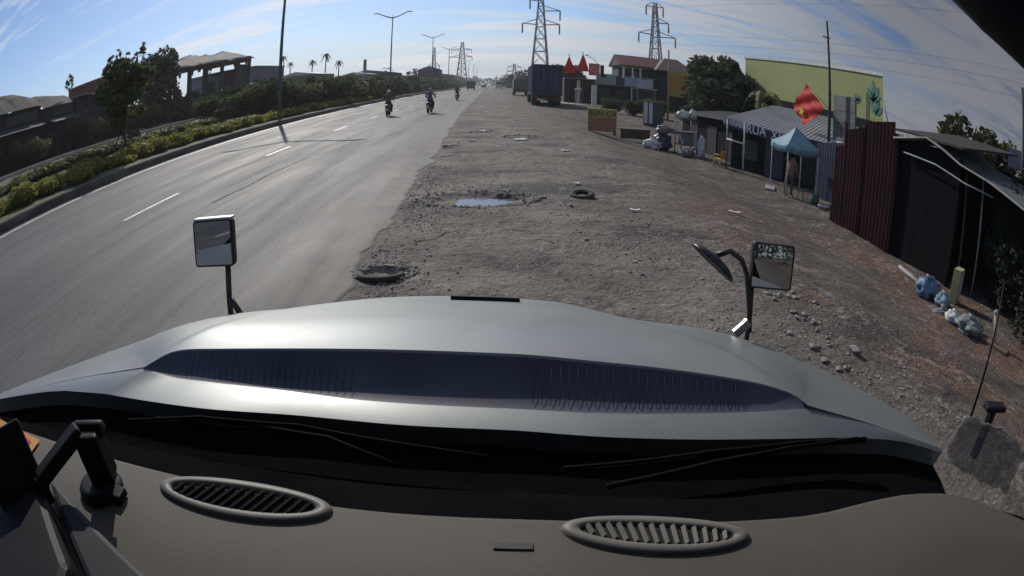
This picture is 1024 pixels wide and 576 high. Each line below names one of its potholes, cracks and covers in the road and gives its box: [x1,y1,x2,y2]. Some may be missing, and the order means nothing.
pothole [349,262,420,279]
pothole [405,189,550,209]
